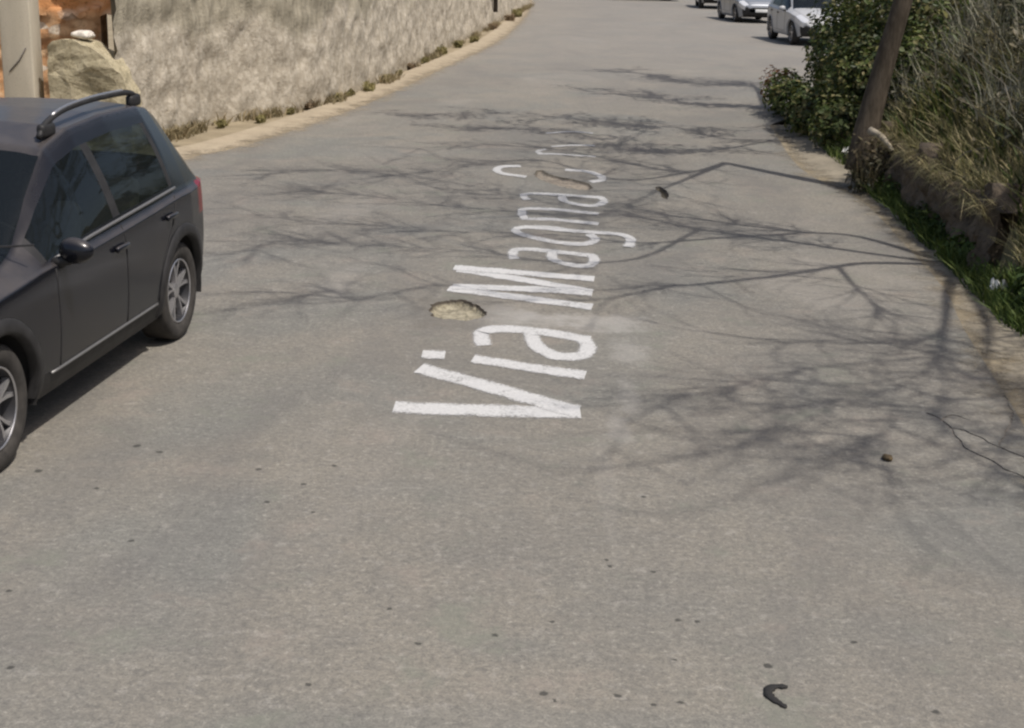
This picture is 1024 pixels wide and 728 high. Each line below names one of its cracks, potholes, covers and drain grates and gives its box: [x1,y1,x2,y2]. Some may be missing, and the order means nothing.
pothole [429,299,487,321]
pothole [534,170,593,190]
crack [927,393,1024,478]
